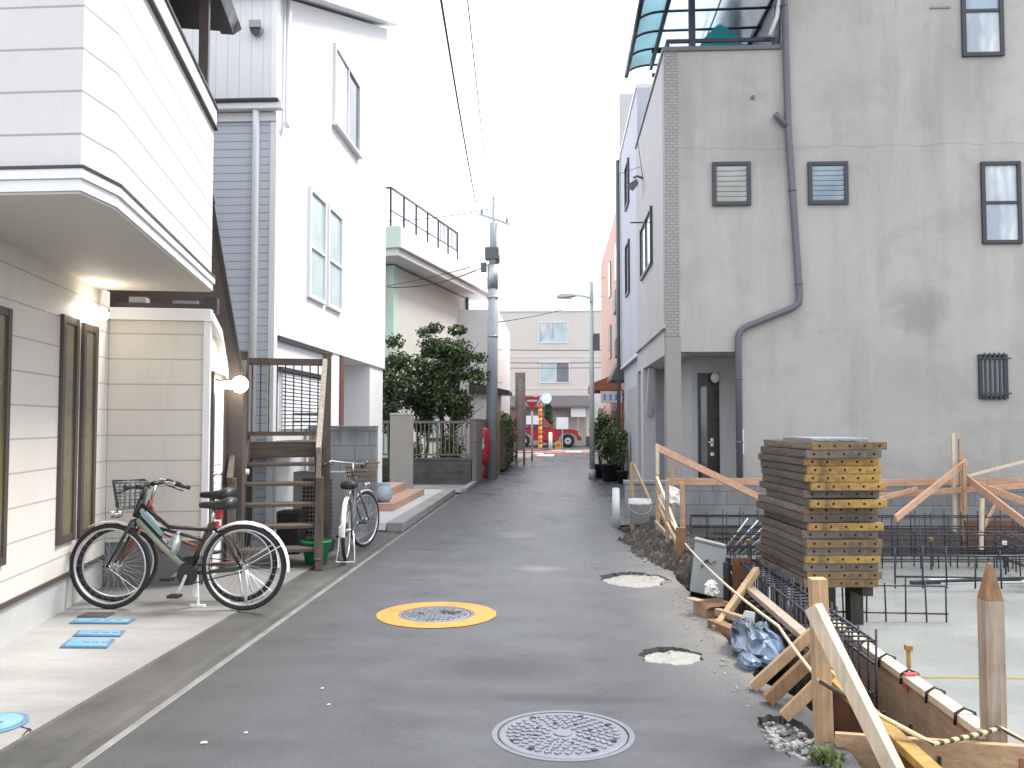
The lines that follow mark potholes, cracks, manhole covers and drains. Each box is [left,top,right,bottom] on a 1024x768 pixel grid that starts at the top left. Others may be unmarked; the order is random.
pothole [757,714,822,762]
manhole cover [492,710,635,762]
manhole cover [376,602,496,628]
pothole [637,647,704,665]
utility cover [0,712,29,733]
pothole [599,572,670,588]
